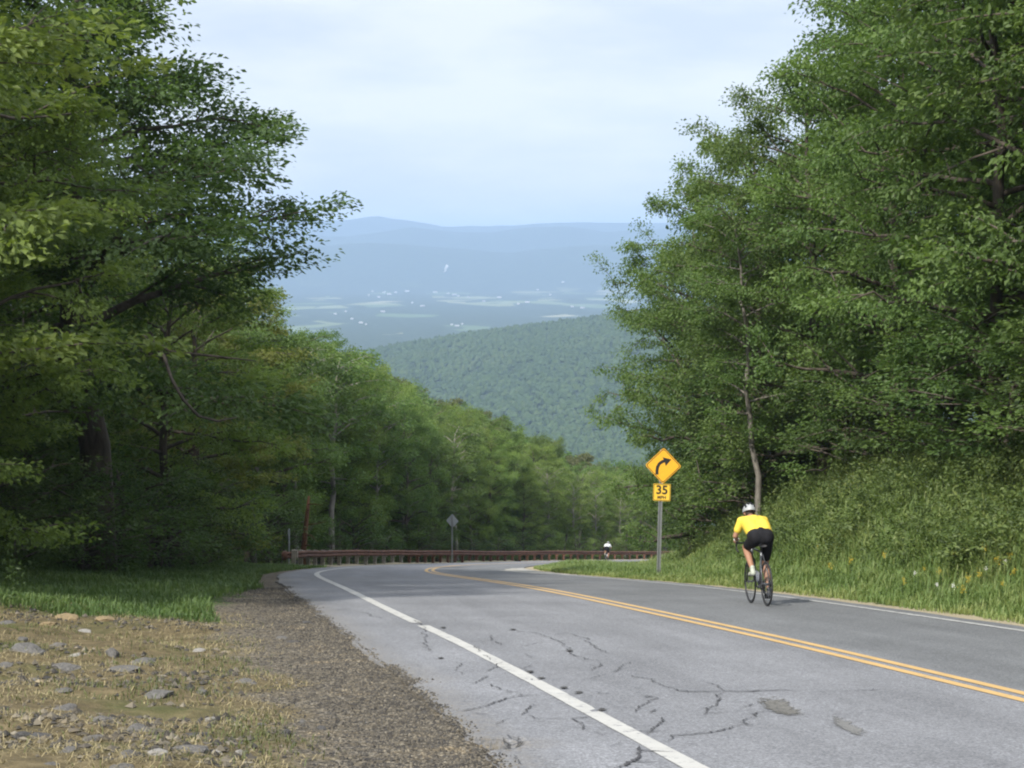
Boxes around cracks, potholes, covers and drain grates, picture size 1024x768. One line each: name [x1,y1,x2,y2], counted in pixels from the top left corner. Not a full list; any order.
crack [455,614,788,768]
